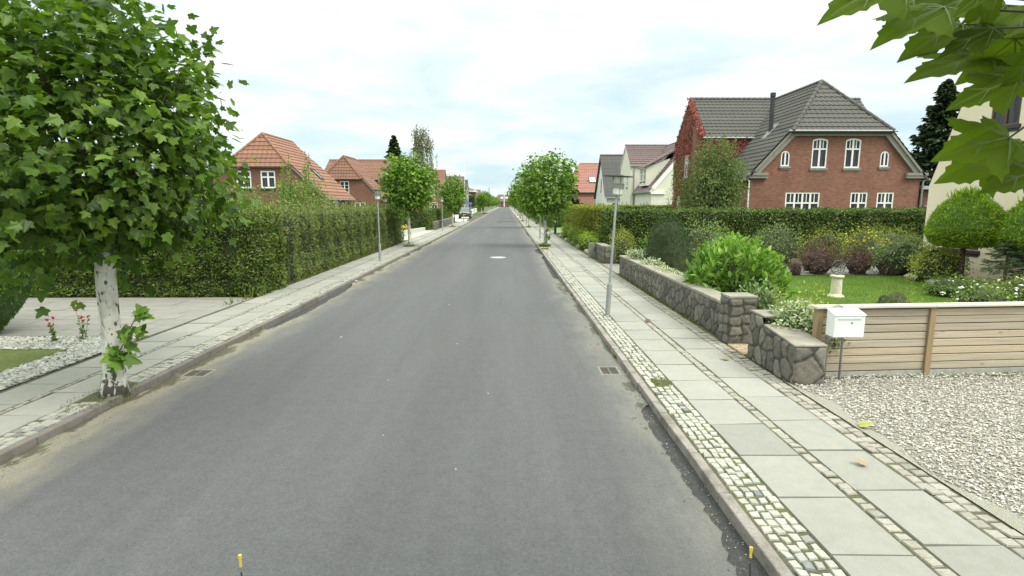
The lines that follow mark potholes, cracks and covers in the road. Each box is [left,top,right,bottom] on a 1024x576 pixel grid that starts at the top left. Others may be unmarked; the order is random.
drain grate [597,366,622,375]
drain grate [179,369,217,377]
